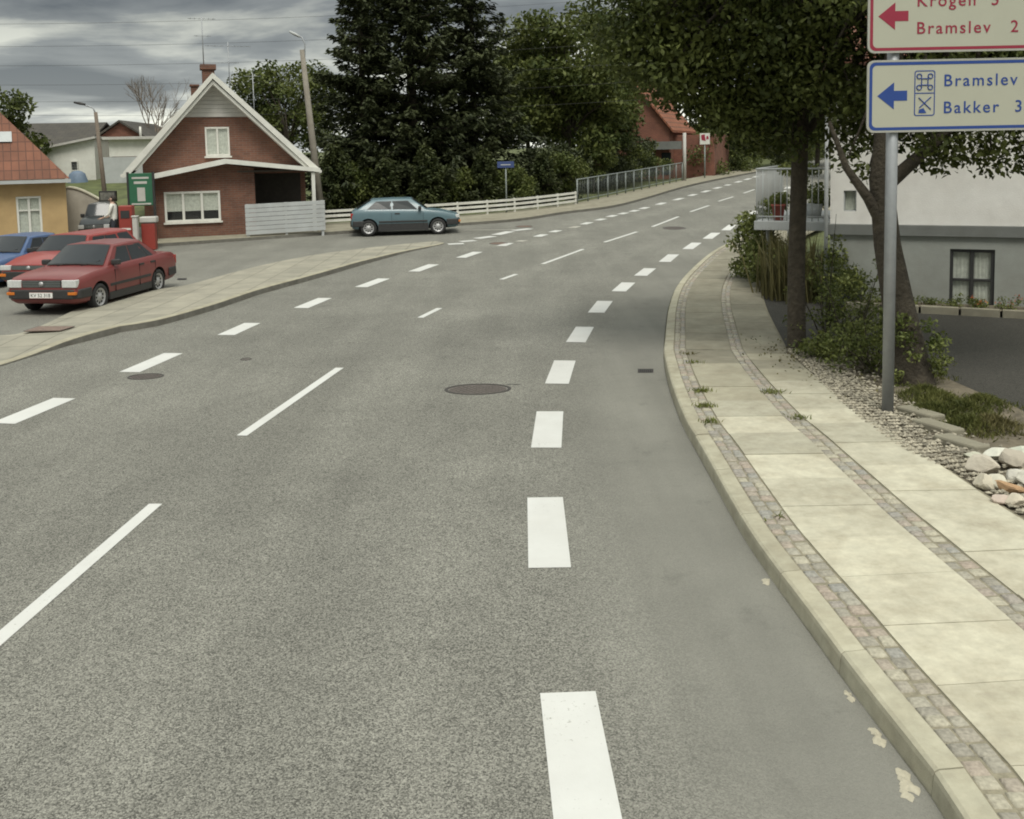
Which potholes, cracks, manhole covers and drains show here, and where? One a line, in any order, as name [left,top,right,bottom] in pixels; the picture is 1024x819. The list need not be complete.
manhole cover [444,383,511,395]
